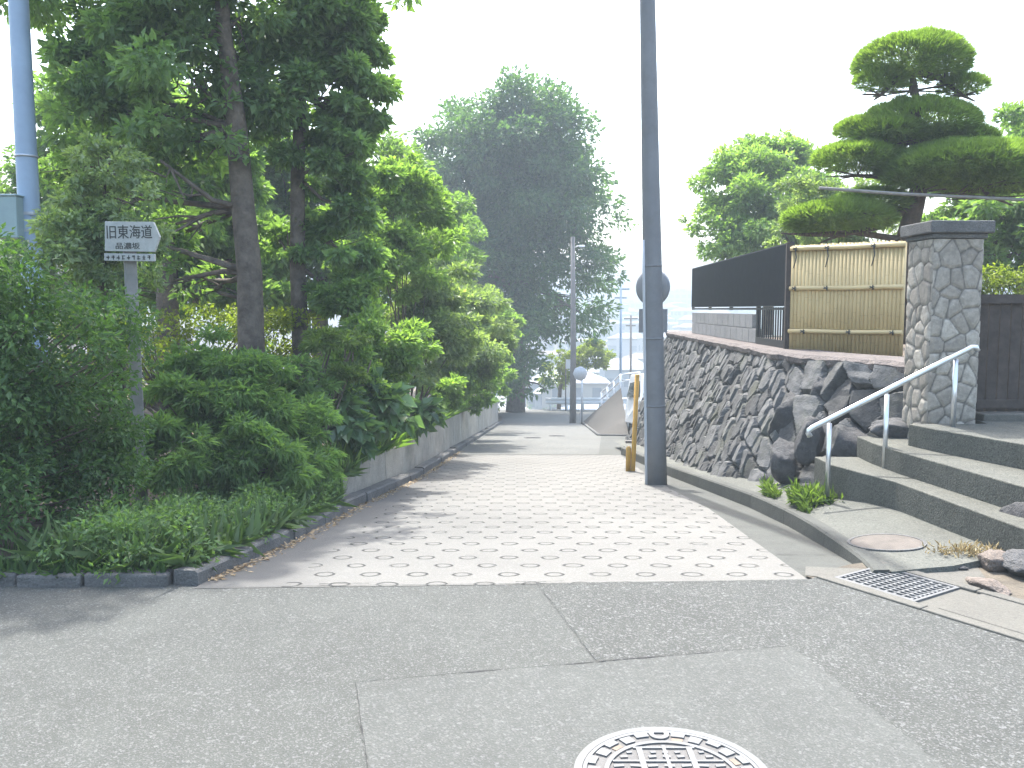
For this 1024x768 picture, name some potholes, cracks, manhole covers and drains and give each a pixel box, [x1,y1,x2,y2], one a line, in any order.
manhole cover [574,727,767,768]
manhole cover [847,533,927,552]
drain grate [836,568,960,602]
